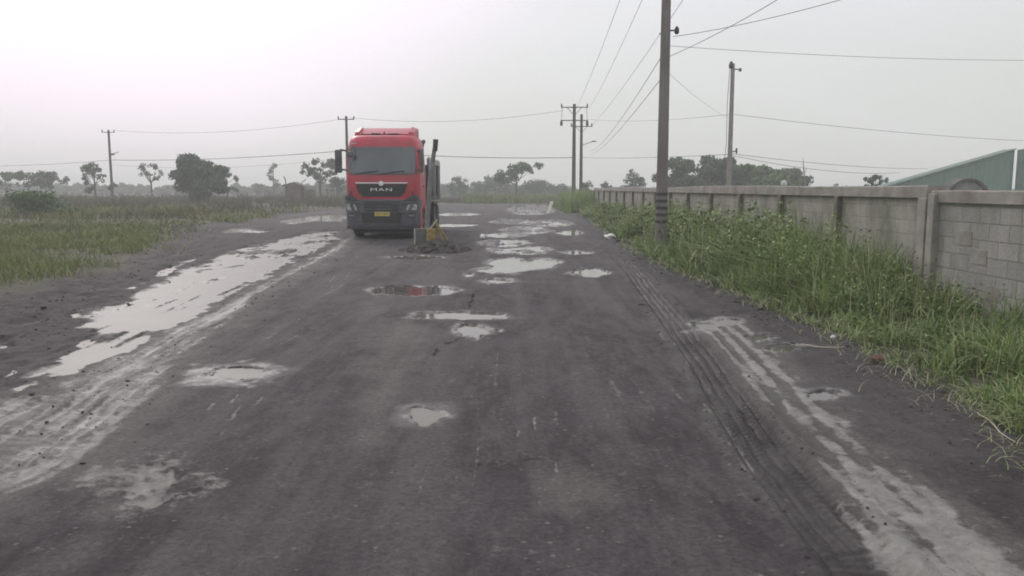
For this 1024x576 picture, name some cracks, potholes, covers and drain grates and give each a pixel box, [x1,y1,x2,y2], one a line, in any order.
pothole [397,404,455,427]
crack [467,290,479,308]
pothole [450,322,504,341]
pothole [404,310,515,320]
pothole [367,284,464,297]
pothole [71,455,220,511]
pothole [472,257,564,274]
pothole [798,387,850,402]
pothole [563,267,614,278]
crack [430,336,467,356]
pothole [192,364,275,384]
